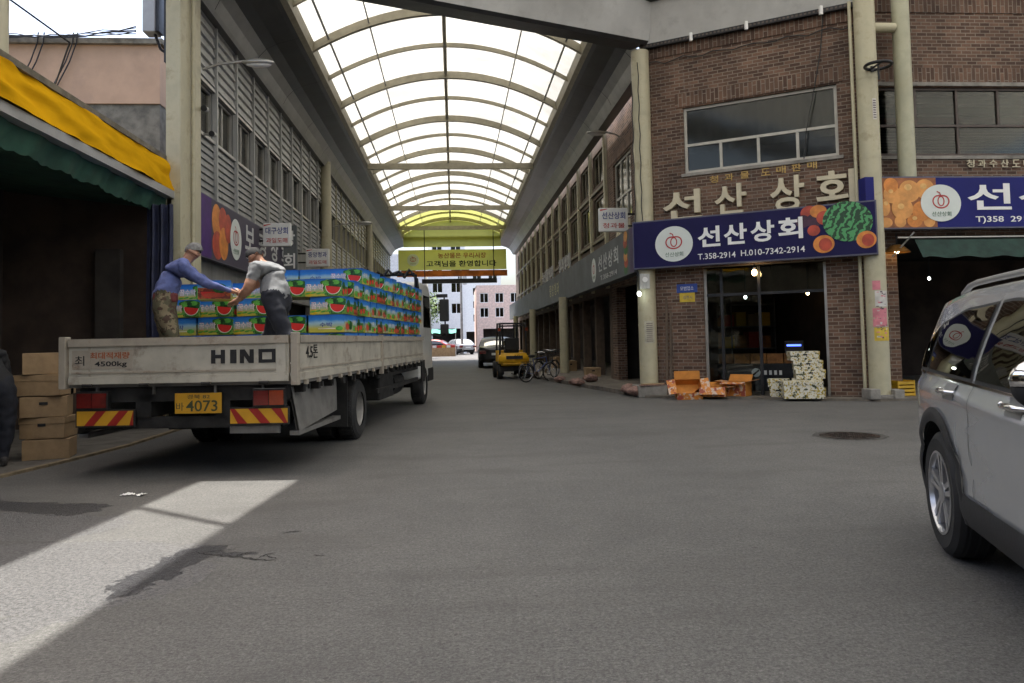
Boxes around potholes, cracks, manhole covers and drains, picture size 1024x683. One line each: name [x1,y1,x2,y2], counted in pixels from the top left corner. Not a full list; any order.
manhole cover [812,431,889,440]
